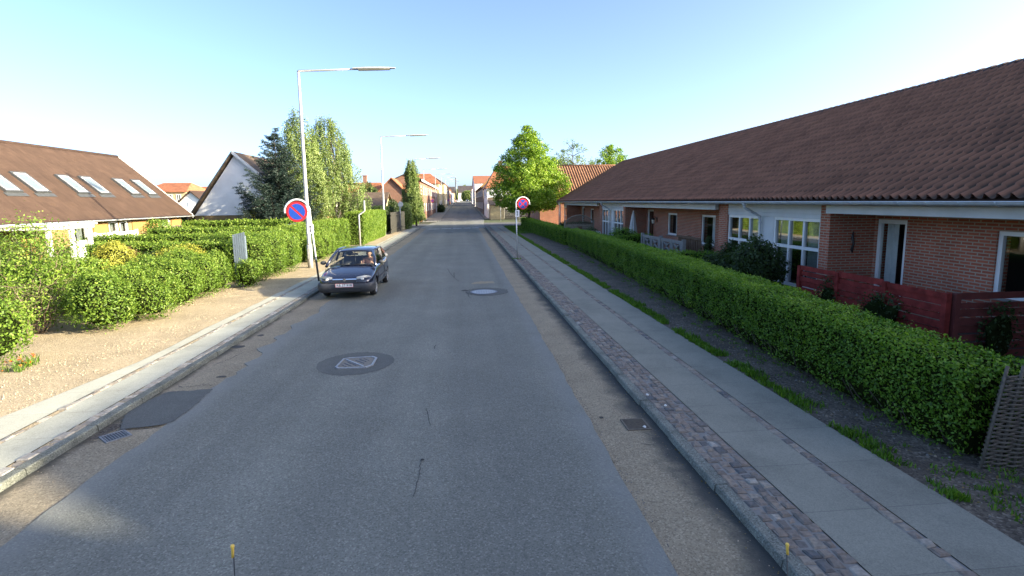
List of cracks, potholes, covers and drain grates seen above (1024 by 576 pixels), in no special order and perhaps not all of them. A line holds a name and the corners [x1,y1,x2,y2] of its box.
drain grate [98,429,133,444]
manhole cover [335,356,377,369]
